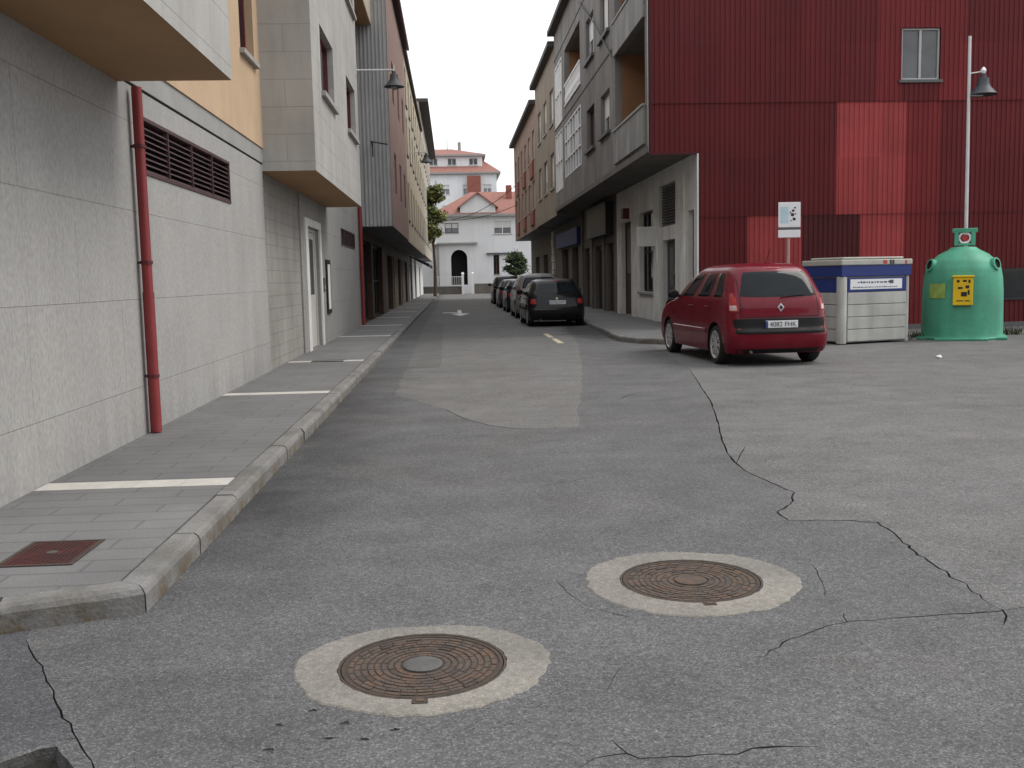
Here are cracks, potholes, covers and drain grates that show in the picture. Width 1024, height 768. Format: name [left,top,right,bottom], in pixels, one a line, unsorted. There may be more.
manhole cover [0,539,105,568]
crack [690,370,1023,659]
manhole cover [292,625,551,718]
manhole cover [584,552,802,618]
crack [579,739,818,768]
crack [26,640,95,768]
